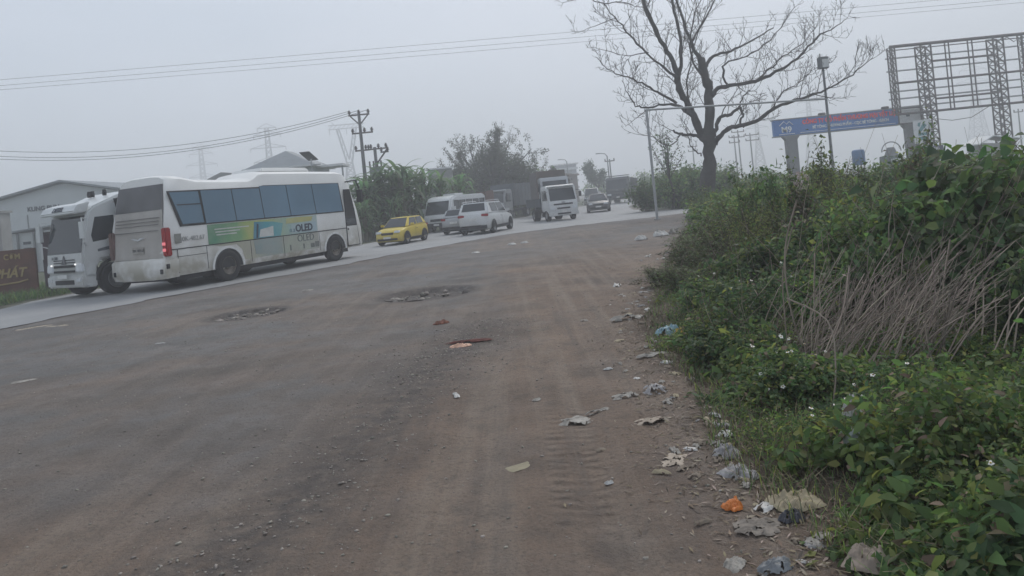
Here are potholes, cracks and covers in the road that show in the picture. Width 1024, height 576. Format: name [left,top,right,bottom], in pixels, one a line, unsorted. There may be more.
pothole [371,285,482,302]
pothole [200,306,291,323]
